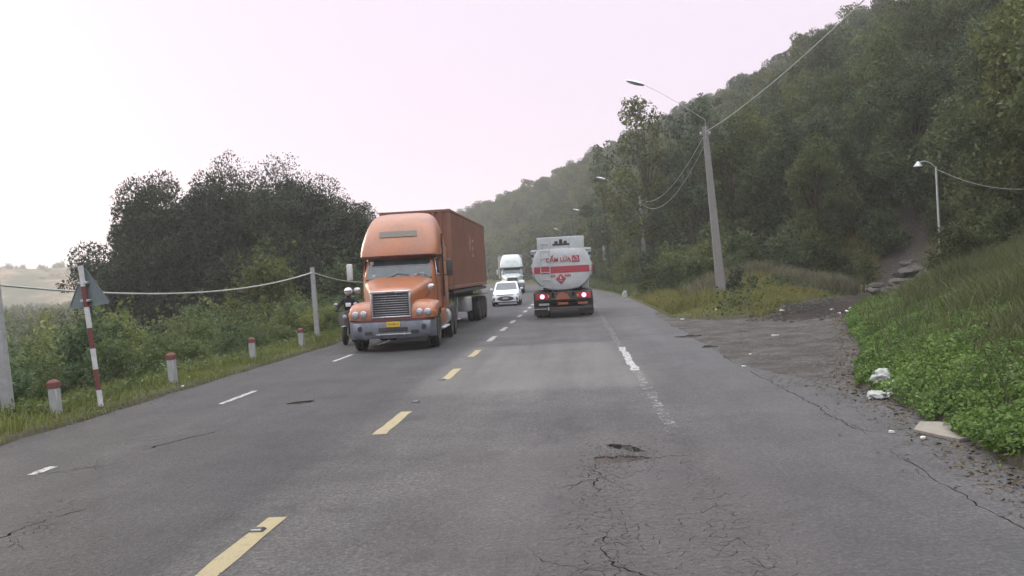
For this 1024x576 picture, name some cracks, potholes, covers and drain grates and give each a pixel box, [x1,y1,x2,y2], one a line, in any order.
crack [0,497,98,553]
crack [463,439,799,576]
crack [890,449,1024,529]
crack [29,430,222,480]
pothole [607,444,644,452]
